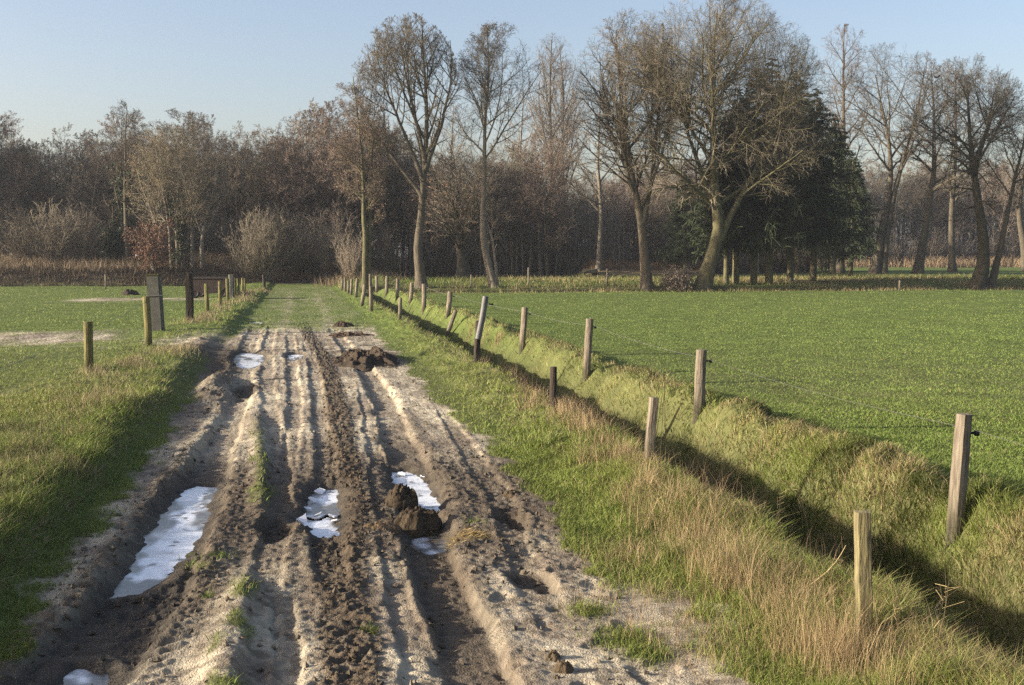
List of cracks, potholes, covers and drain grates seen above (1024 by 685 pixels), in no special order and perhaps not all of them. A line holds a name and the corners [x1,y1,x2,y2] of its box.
pothole [229,349,269,365]
